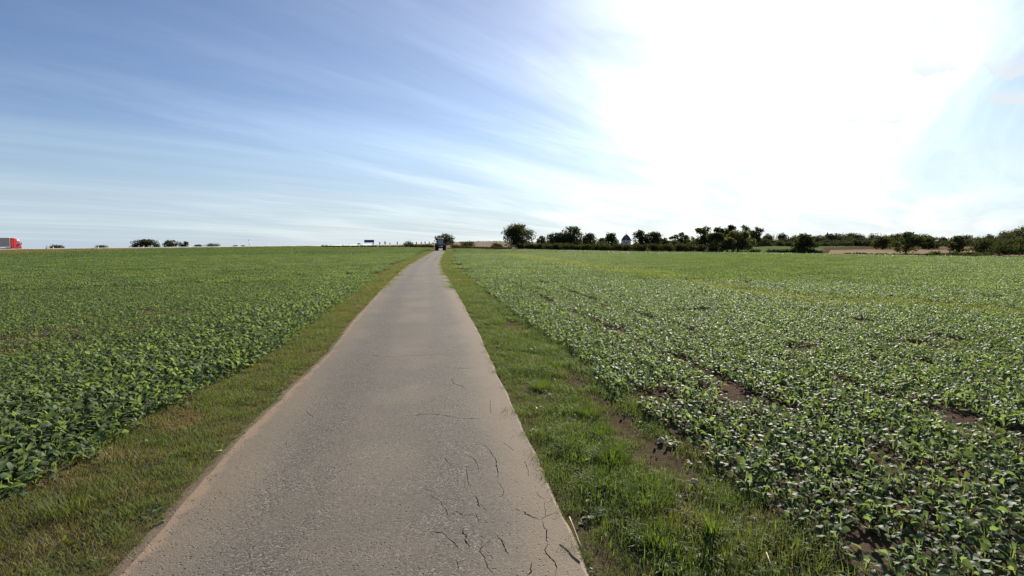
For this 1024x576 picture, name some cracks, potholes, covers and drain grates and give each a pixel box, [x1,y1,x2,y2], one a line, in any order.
crack [424,443,557,576]
